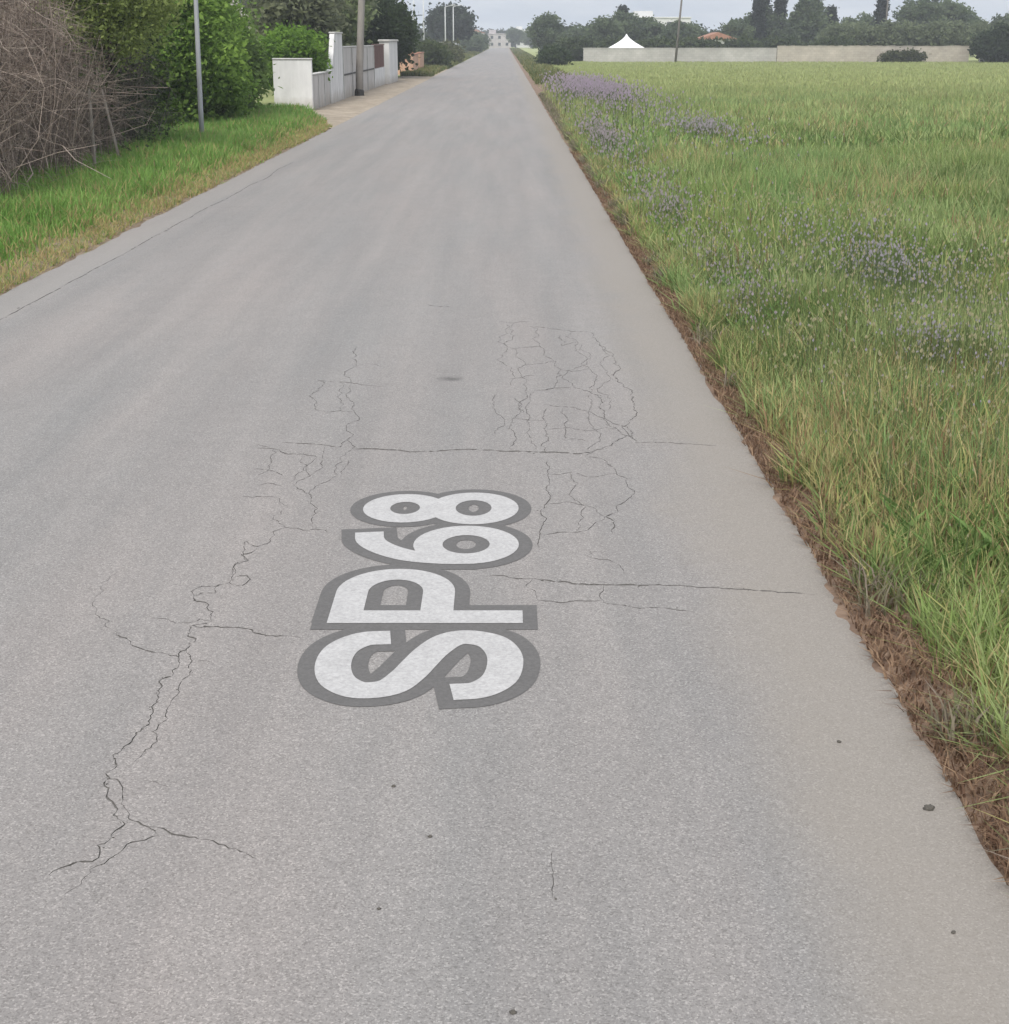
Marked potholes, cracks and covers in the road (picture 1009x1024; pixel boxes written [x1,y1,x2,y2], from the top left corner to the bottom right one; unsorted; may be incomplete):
crack [49,496,327,894]
crack [256,321,702,572]
crack [493,575,805,611]
